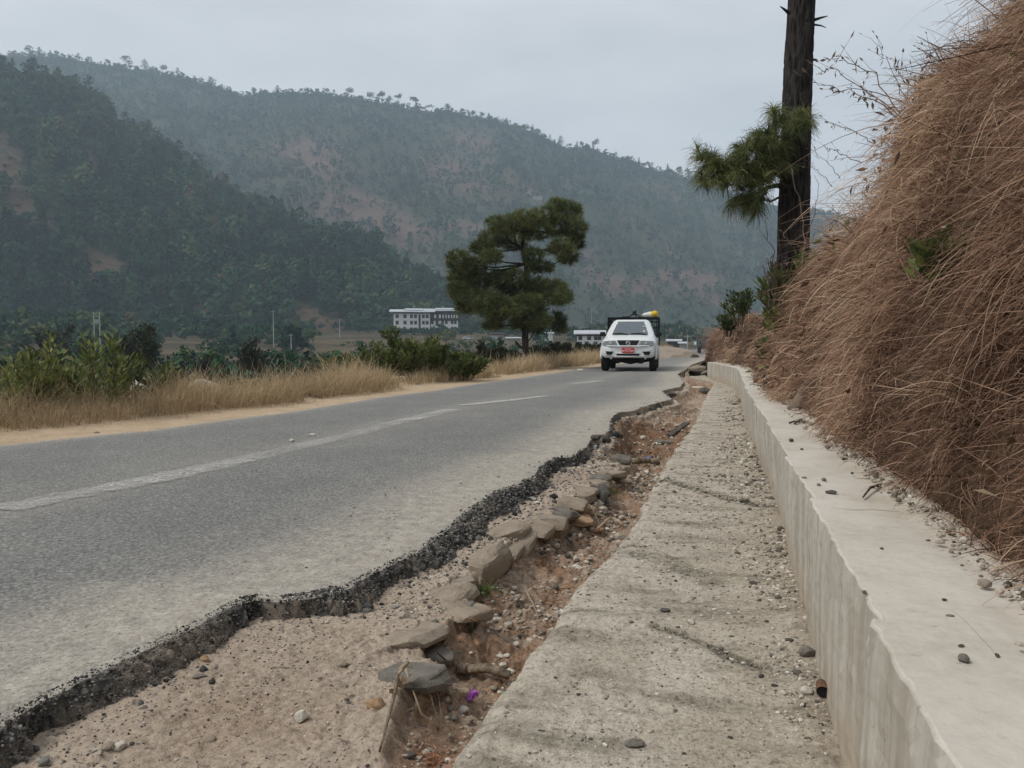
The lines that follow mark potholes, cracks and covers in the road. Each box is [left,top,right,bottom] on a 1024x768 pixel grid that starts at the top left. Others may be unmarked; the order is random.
pothole [668,390,706,410]
crack [654,626,766,669]
pothole [613,417,685,466]
